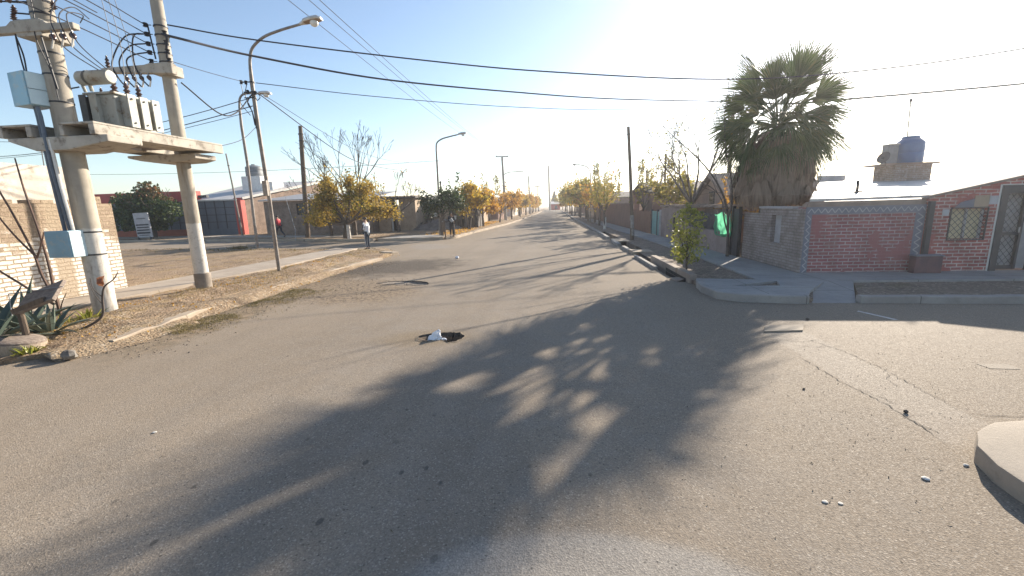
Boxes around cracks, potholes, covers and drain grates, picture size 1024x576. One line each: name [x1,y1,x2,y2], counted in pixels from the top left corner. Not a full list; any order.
crack [792,338,1006,446]
pothole [415,332,466,343]
